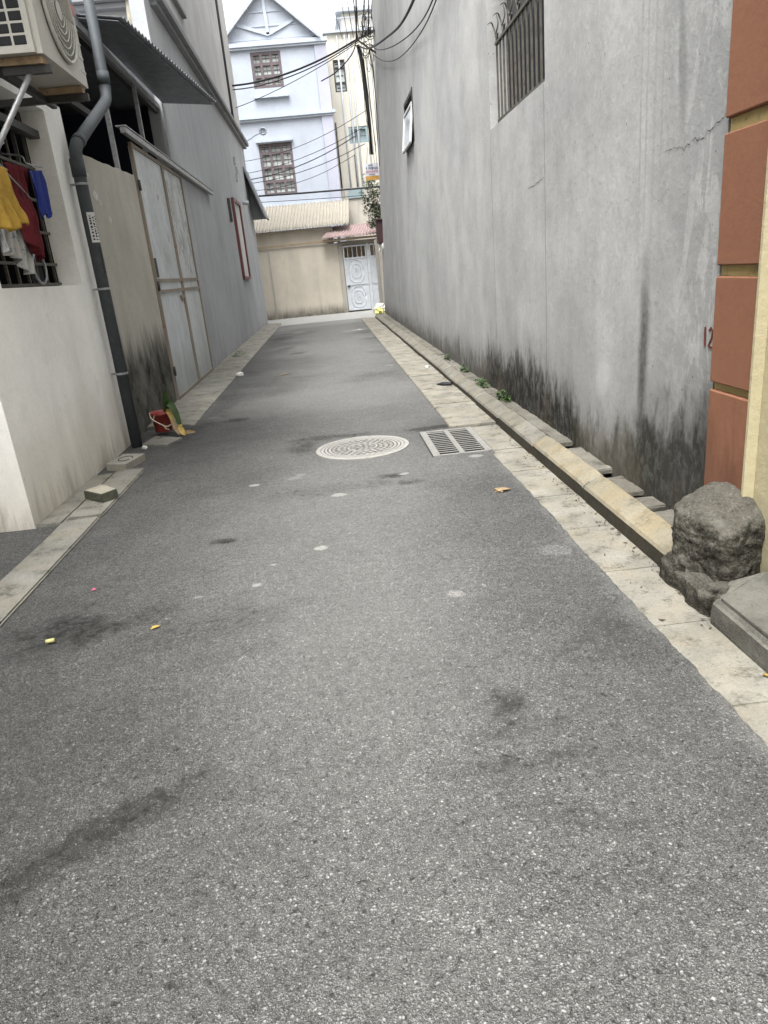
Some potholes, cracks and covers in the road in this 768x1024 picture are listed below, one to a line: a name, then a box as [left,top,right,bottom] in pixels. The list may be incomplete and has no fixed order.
drain grate [419,427,492,457]
manhole cover [316,435,409,460]
